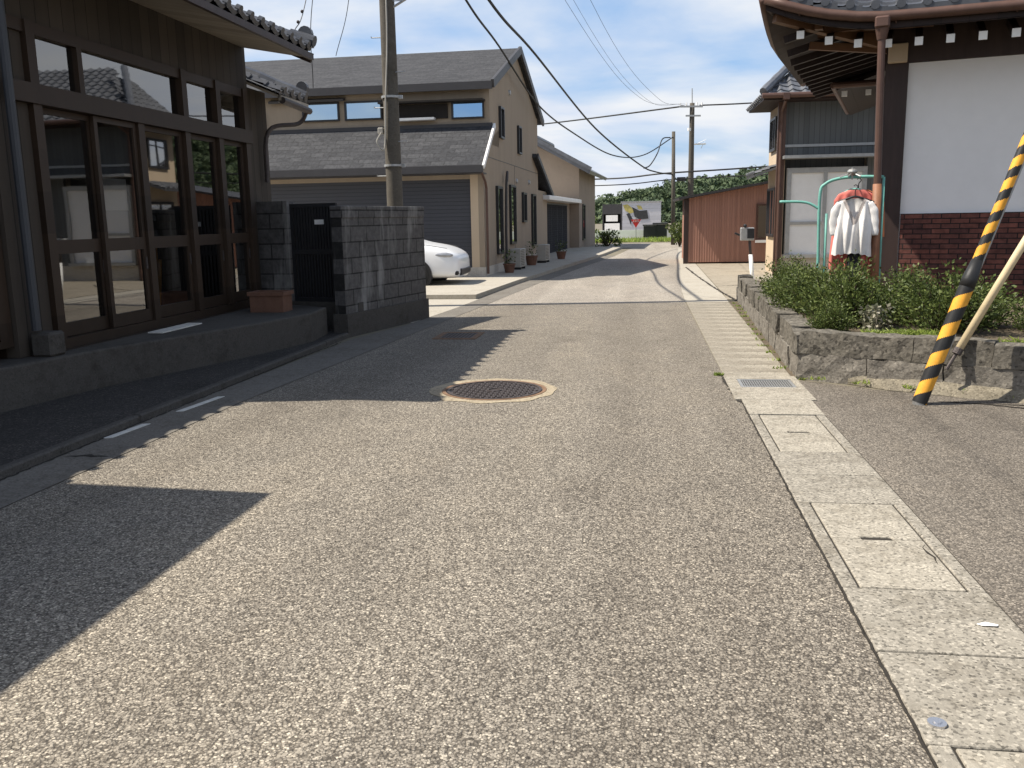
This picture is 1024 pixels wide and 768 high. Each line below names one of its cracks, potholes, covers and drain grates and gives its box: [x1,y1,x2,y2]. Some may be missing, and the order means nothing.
drain grate [737,379,796,387]
manhole cover [429,378,557,404]
